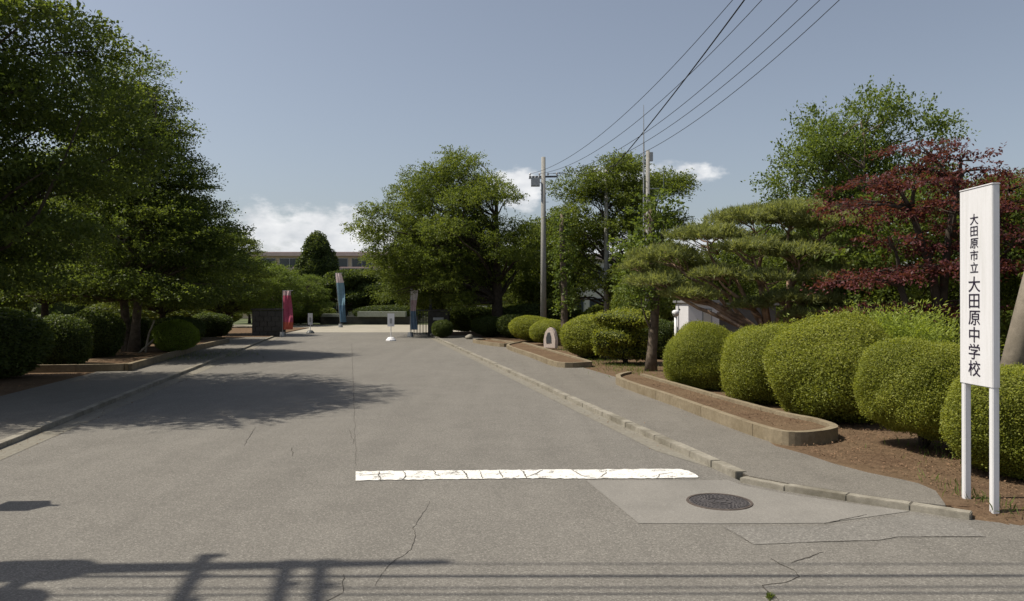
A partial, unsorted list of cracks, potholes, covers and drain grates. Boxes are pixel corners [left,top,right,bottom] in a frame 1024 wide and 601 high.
crack [762,536,984,601]
manhole cover [686,493,753,511]
